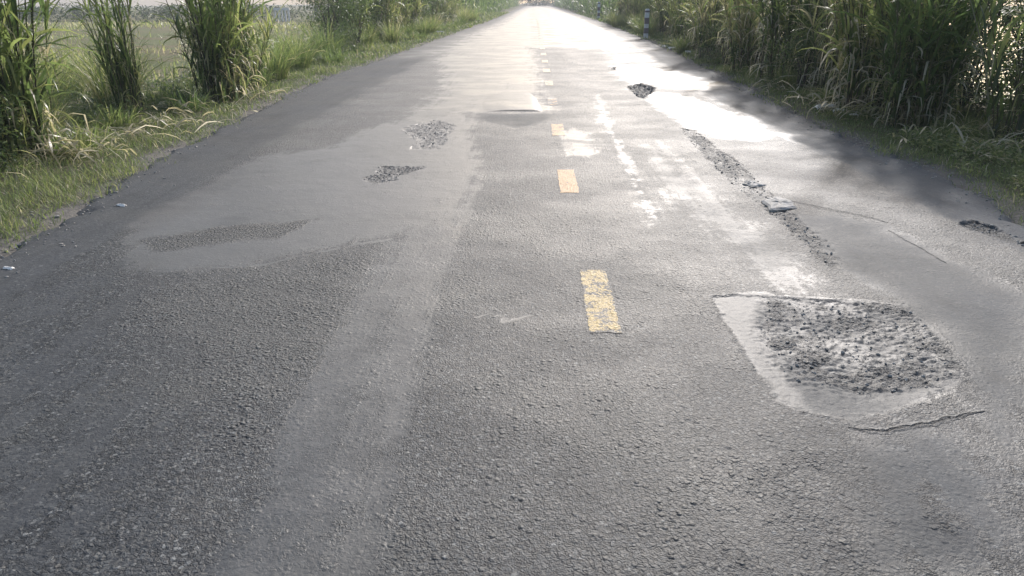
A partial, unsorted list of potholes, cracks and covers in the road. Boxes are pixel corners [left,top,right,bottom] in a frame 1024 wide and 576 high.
pothole [615,82,667,100]
crack [848,410,985,435]
pothole [691,288,992,440]
pothole [940,216,1024,243]
pothole [346,164,436,186]
crack [669,126,946,280]
pothole [388,118,466,151]
